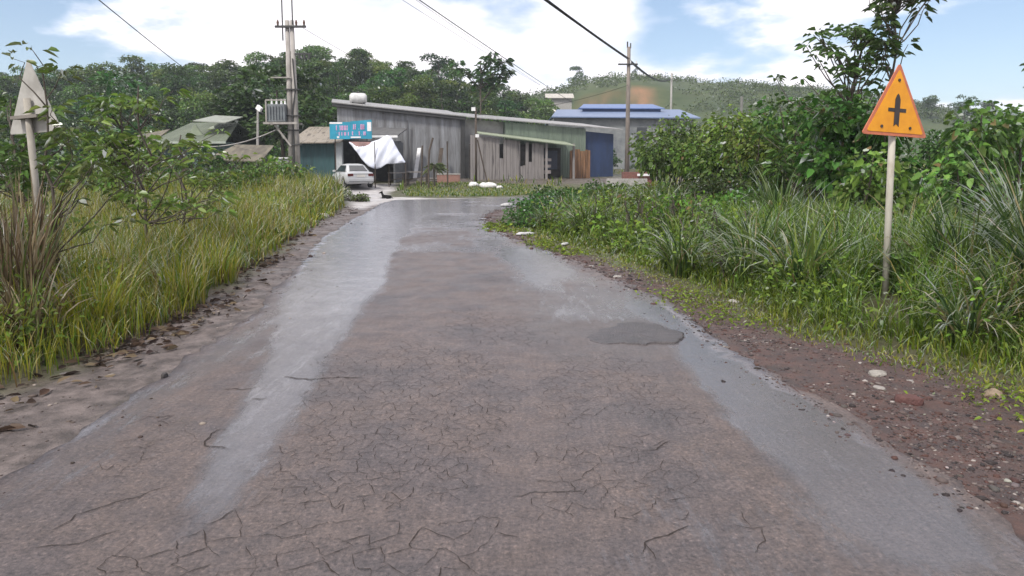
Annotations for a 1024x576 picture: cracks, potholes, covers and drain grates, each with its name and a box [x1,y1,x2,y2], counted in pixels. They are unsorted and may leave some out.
crack [53,486,167,530]
crack [513,434,700,521]
crack [97,510,517,576]
crack [523,355,708,428]
crack [99,410,225,477]
crack [642,526,687,558]
crack [252,341,522,509]
